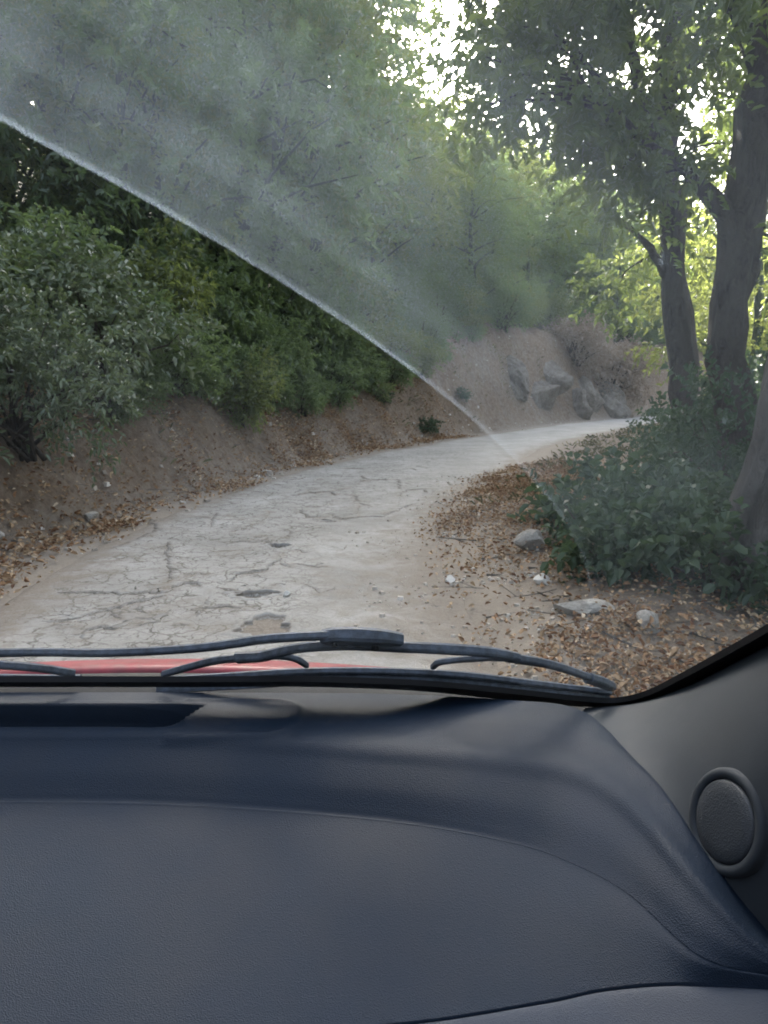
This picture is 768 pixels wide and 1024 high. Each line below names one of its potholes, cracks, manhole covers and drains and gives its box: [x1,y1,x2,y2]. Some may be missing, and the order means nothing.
pothole [222,589,292,600]
pothole [220,610,301,637]
crack [41,468,428,639]
pothole [264,542,297,550]
